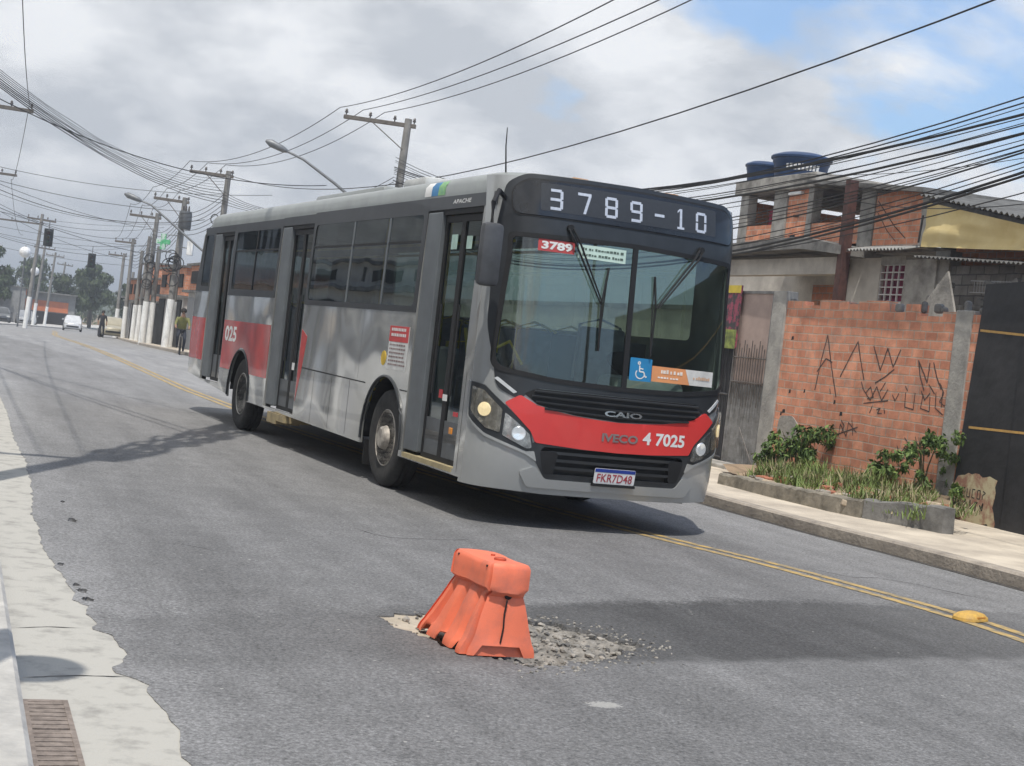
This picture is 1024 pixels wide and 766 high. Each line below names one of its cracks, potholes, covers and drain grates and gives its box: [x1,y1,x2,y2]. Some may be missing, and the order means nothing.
pothole [377,612,684,678]
